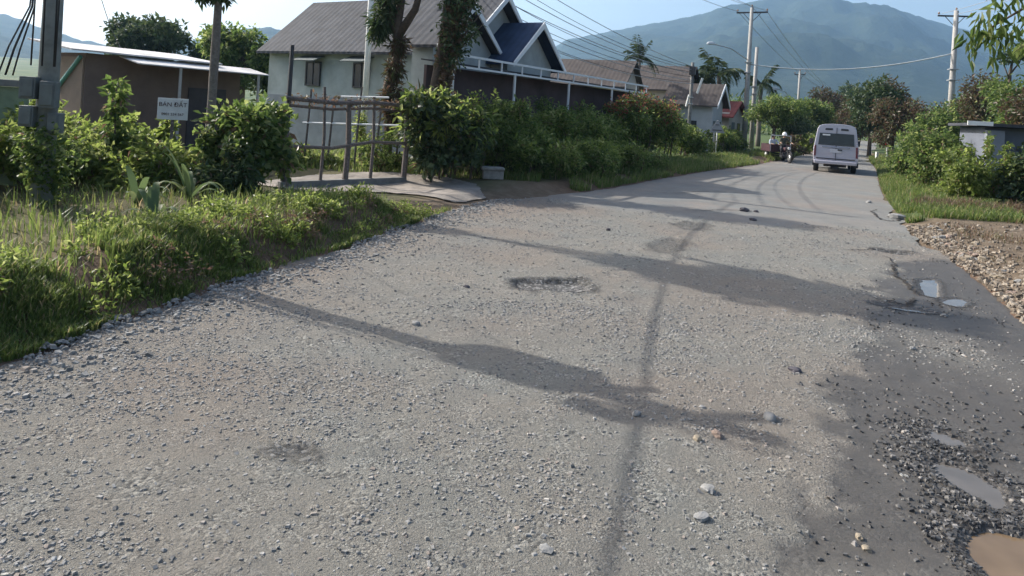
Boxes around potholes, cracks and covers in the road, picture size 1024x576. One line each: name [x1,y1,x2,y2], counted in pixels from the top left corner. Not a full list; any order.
pothole [925,428,982,450]
crack [845,248,919,306]
pothole [920,454,1022,511]
pothole [936,297,974,308]
pothole [951,519,1024,576]
pothole [914,278,948,298]
pothole [511,276,596,293]
